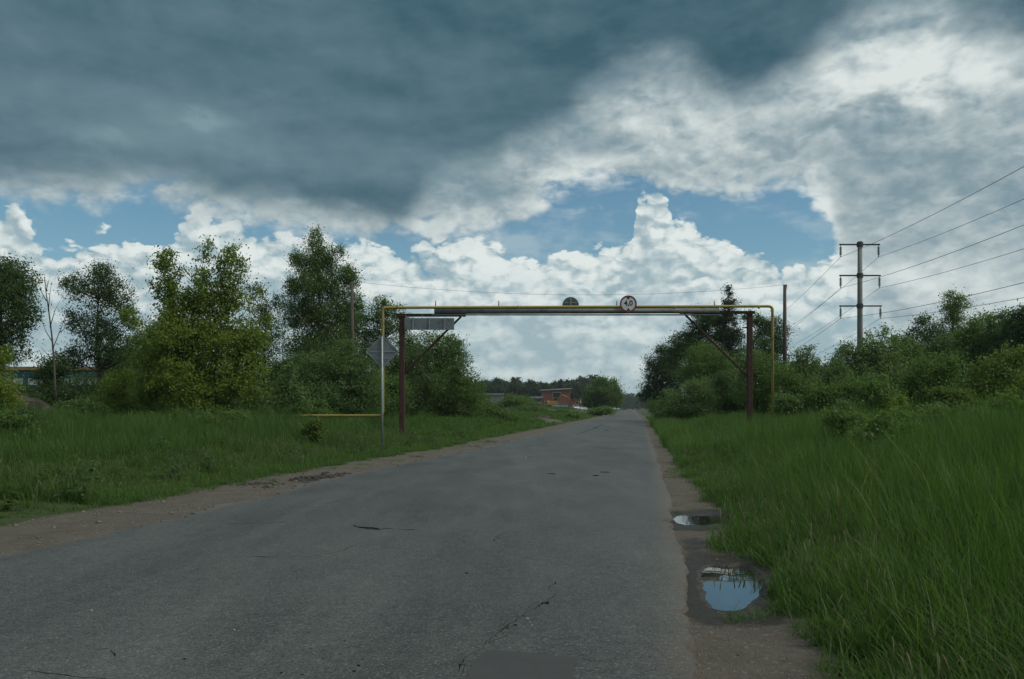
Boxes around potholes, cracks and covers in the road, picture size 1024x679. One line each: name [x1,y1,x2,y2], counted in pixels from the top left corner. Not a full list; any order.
pothole [695,562,768,611]
pothole [673,513,732,526]
crack [255,524,414,557]
crack [455,582,559,674]
crack [31,670,105,679]
